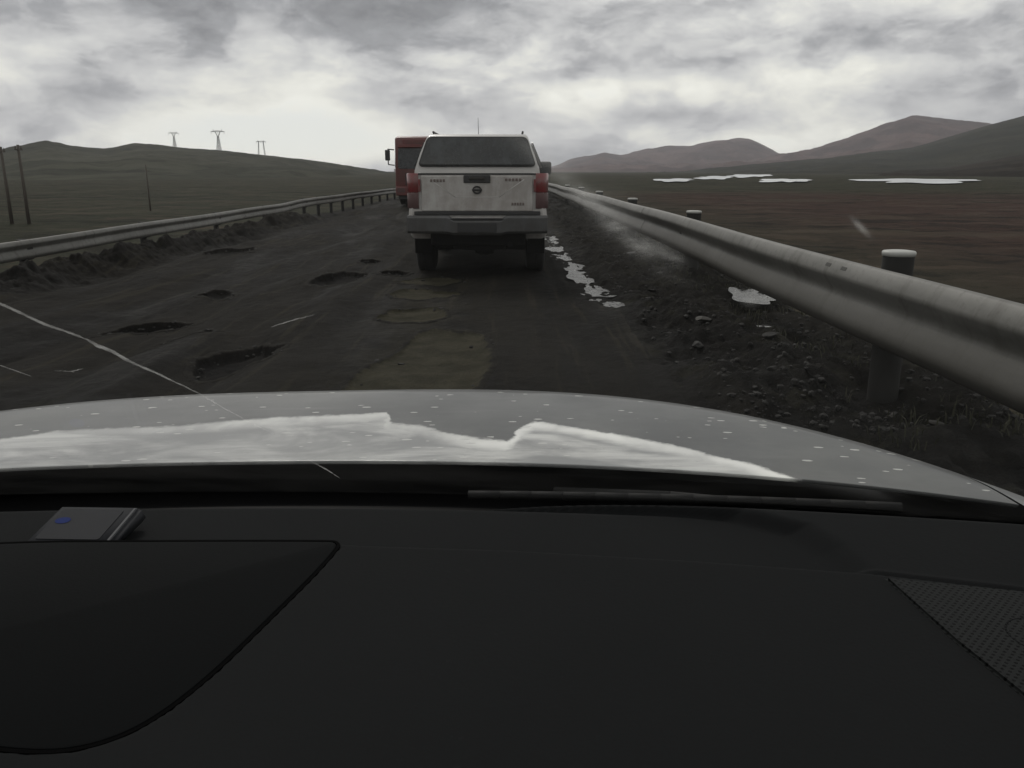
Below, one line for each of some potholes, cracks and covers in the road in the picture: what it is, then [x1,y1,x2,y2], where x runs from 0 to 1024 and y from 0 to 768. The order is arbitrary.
pothole [193,289,240,301]
pothole [88,320,205,339]
pothole [300,271,371,290]
pothole [178,341,293,385]
pothole [194,246,259,257]
